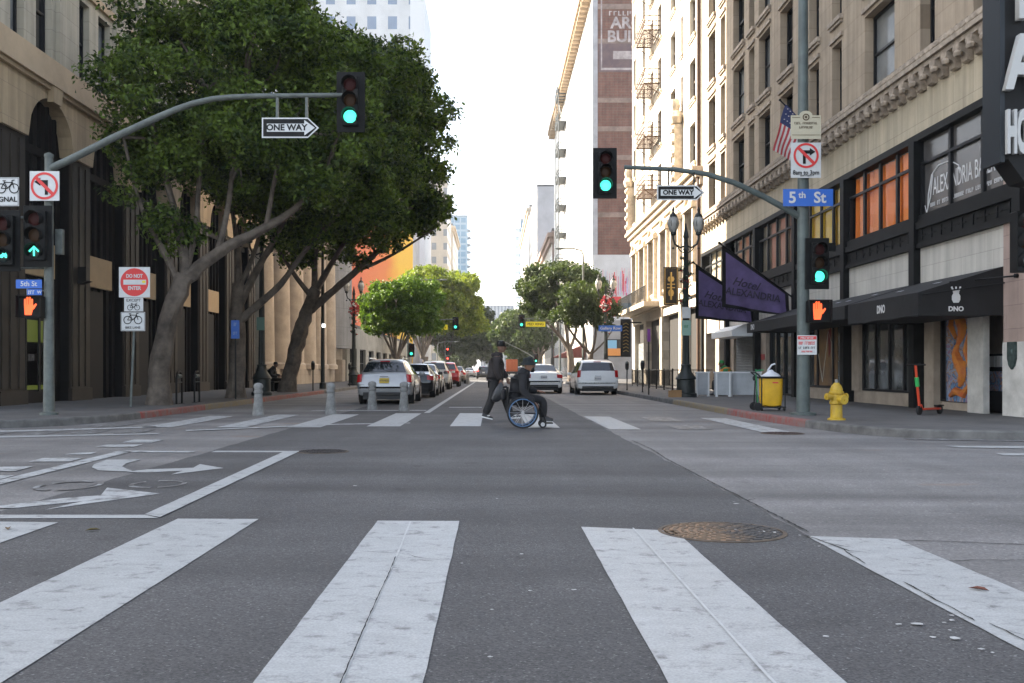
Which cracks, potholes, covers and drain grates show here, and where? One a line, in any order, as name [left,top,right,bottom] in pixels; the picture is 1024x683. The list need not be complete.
crack [918,540,1014,561]
manhole cover [658,522,788,543]
crack [903,581,1023,639]
